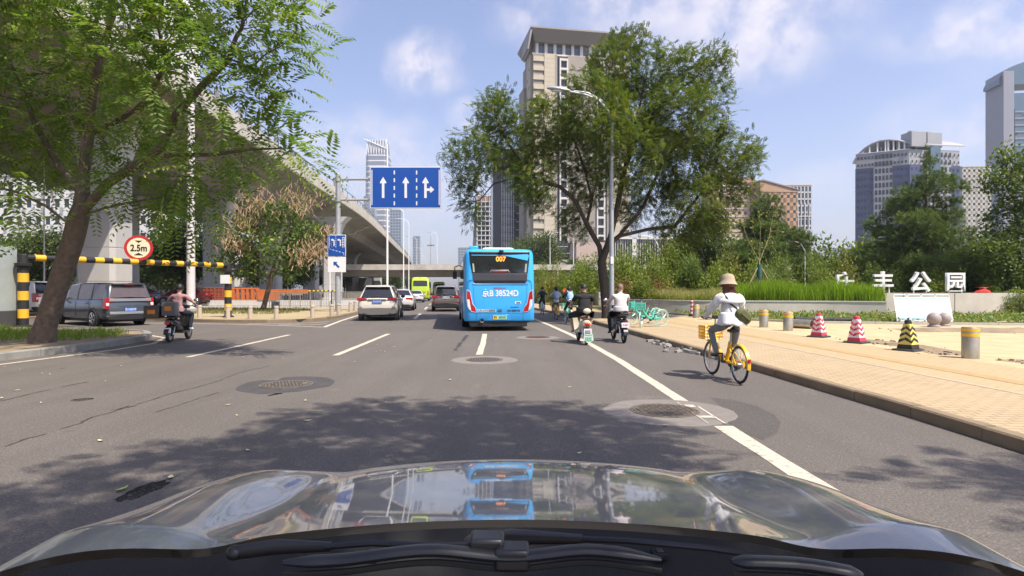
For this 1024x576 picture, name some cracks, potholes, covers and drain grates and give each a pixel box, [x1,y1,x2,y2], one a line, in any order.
manhole cover [451,356,518,364]
manhole cover [236,376,335,394]
crack [4,366,266,447]
pothole [114,479,170,502]
manhole cover [603,399,738,426]
